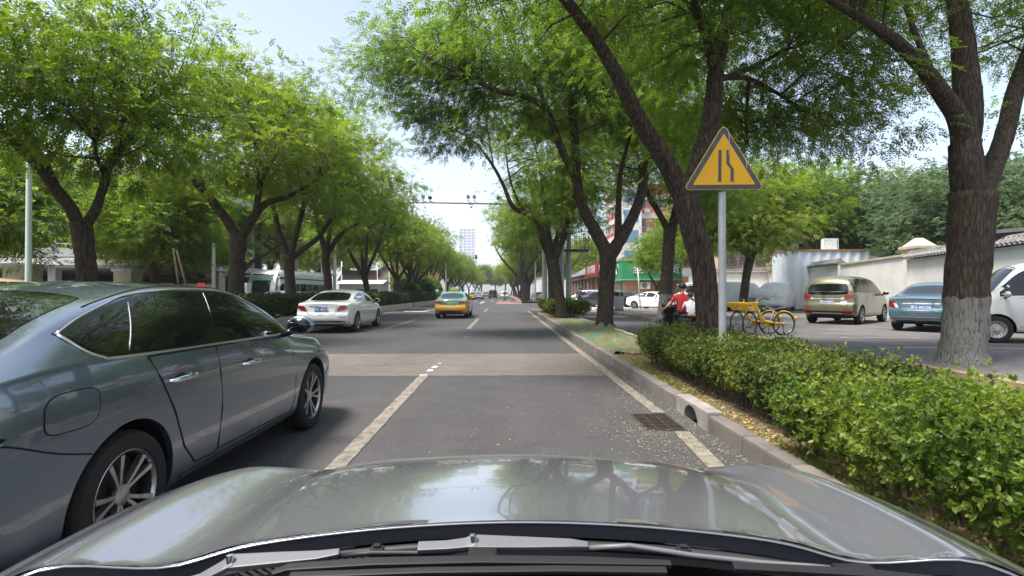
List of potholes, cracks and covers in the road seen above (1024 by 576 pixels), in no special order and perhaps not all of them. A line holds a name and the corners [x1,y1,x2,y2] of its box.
drain grate [630,414,688,431]
